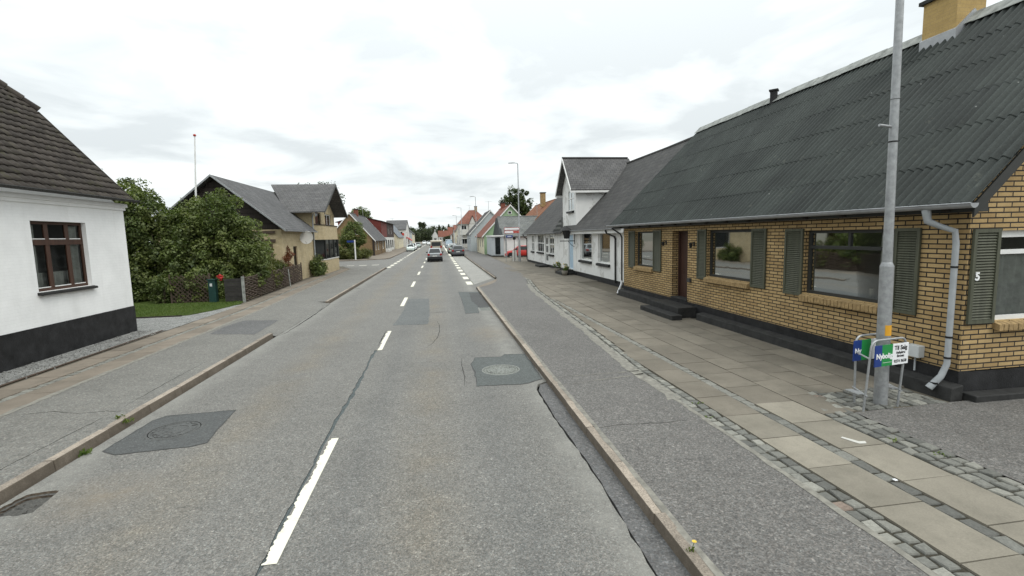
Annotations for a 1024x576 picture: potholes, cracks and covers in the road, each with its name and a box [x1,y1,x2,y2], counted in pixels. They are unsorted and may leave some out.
manhole cover [482,364,520,375]
manhole cover [144,420,204,440]
